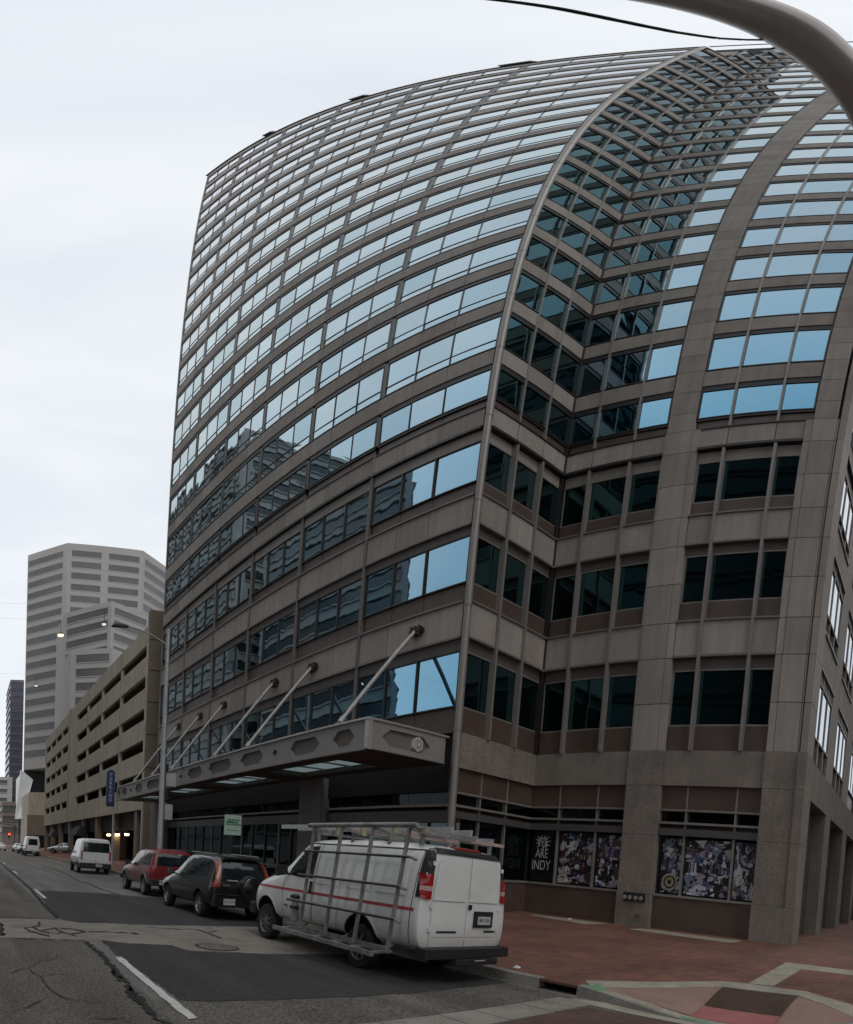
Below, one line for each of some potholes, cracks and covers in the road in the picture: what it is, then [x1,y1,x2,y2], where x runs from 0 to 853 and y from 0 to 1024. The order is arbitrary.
crack [0,917,132,1019]
manhole cover [195,943,240,951]
drain grate [538,983,577,995]
